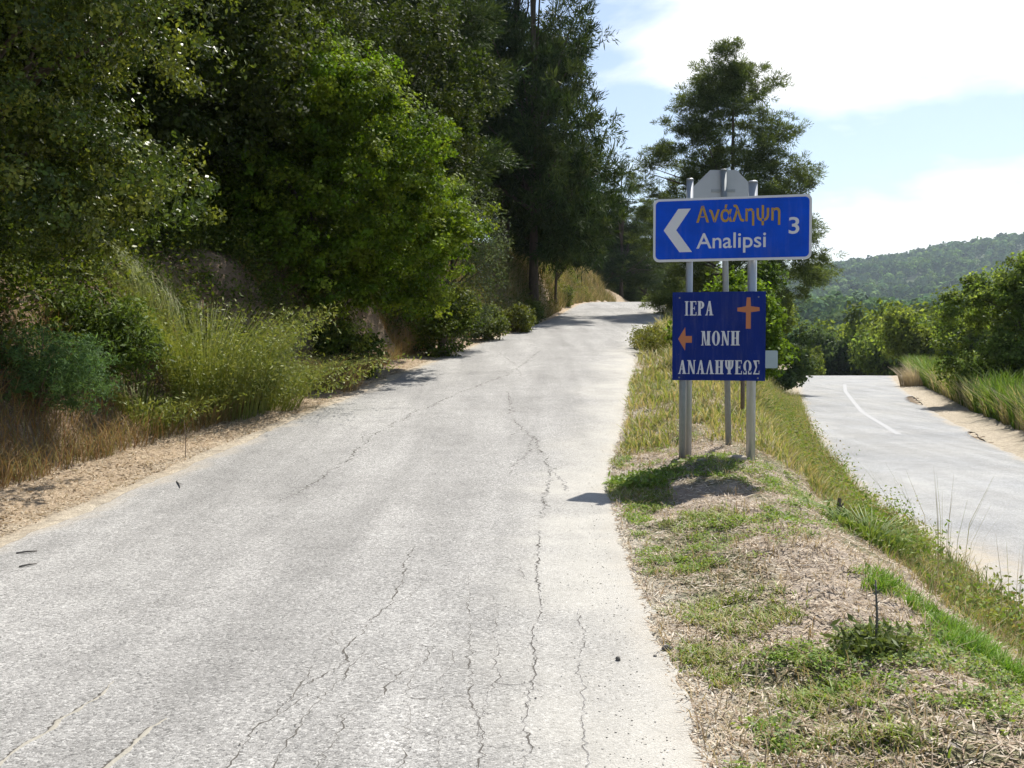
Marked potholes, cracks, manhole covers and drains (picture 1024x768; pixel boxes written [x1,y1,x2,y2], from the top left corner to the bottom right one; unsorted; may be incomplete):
crack [575,607,591,768]
crack [276,349,569,518]
crack [0,681,168,768]
crack [226,530,546,768]
